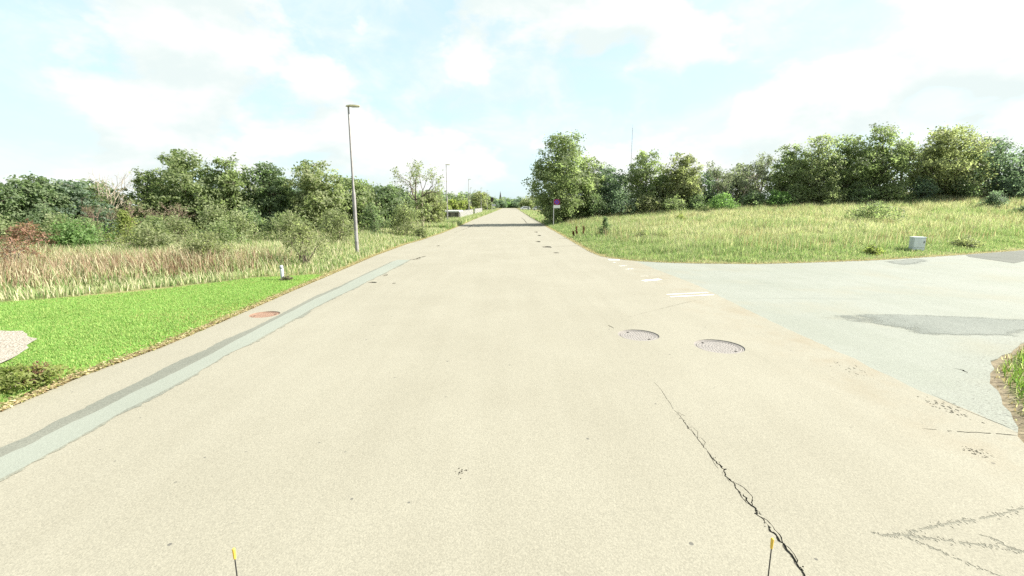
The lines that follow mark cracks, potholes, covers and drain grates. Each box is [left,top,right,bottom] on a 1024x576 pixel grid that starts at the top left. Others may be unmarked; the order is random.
crack [654,382,805,576]
manhole cover [618,330,659,341]
crack [872,506,1024,576]
manhole cover [694,339,745,354]
